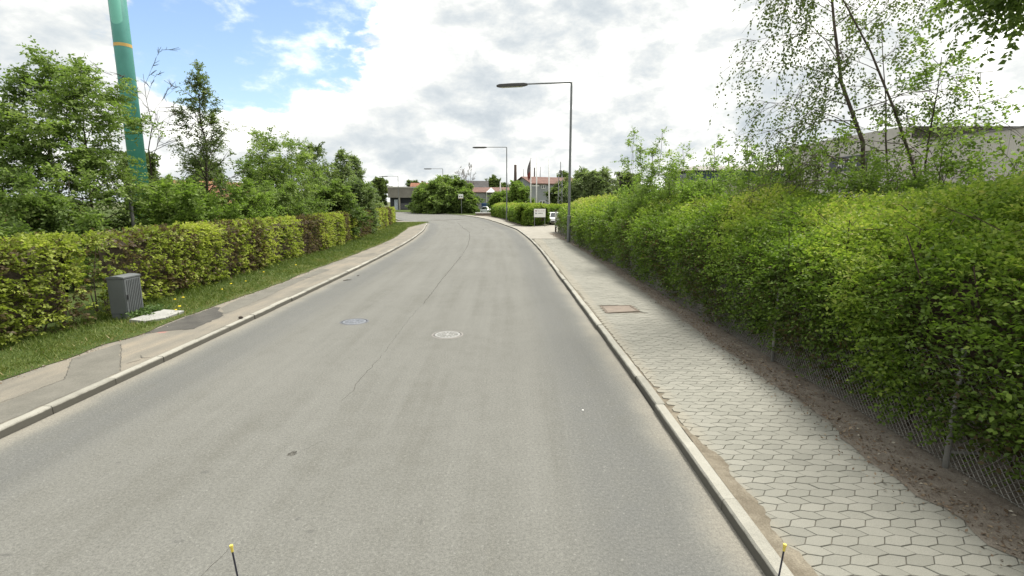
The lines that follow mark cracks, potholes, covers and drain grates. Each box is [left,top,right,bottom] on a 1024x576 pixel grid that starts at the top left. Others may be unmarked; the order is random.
crack [342,219,470,400]
manhole cover [600,305,640,314]
manhole cover [431,331,463,339]
